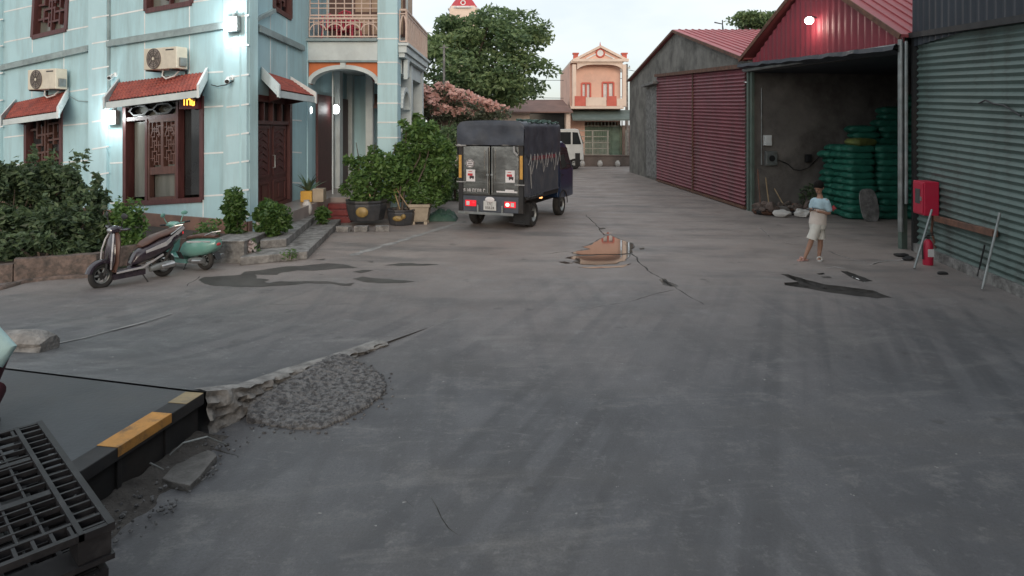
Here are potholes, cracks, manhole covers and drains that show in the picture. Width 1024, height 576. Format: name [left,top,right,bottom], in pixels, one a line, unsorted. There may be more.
pothole [566,235,635,265]
crack [569,243,703,310]
